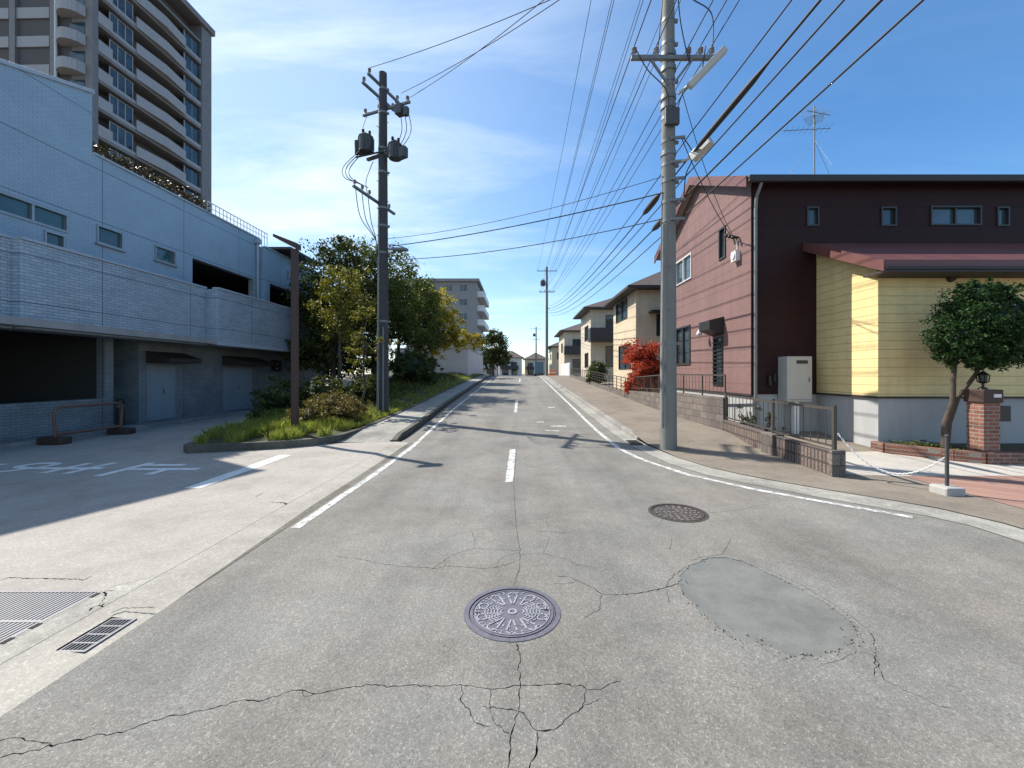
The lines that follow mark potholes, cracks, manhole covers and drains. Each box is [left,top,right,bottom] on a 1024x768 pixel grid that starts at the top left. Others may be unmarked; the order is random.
crack [0,643,621,768]
crack [759,569,956,711]
crack [2,576,113,611]
crack [554,540,731,618]
drain grate [0,591,102,665]
drain grate [57,618,137,653]
manhole cover [464,586,561,642]
manhole cover [648,503,709,523]
